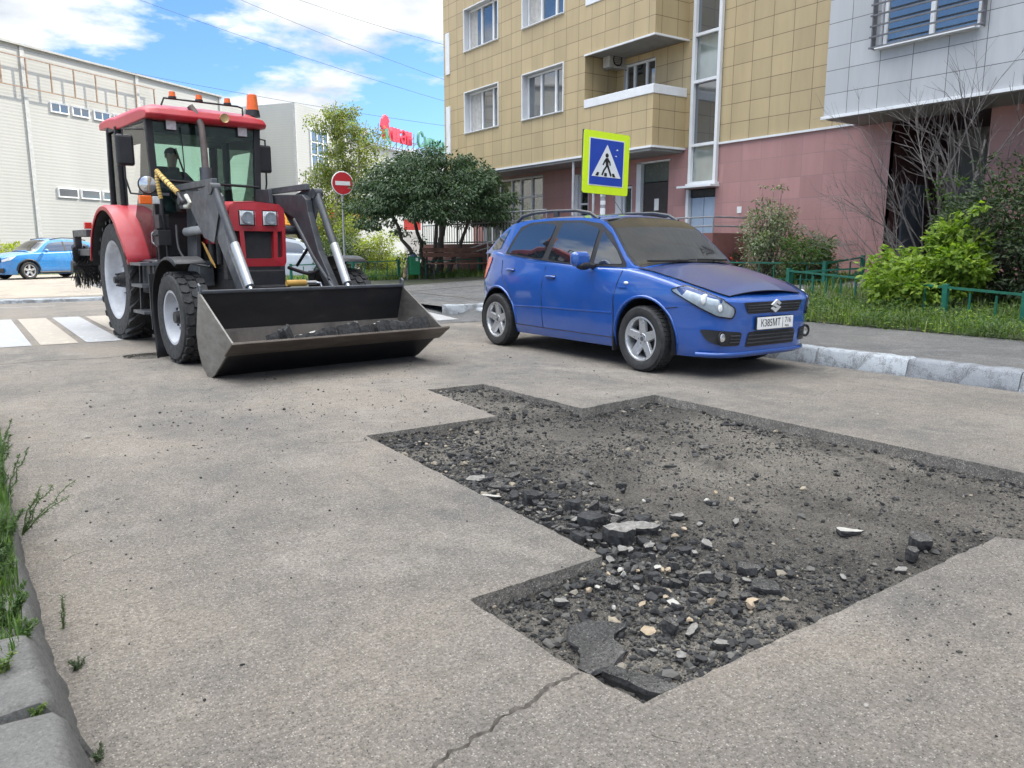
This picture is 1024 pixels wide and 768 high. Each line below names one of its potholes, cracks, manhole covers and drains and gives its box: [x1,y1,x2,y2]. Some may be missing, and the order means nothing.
pothole [367,384,1024,703]
crack [431,672,579,768]
